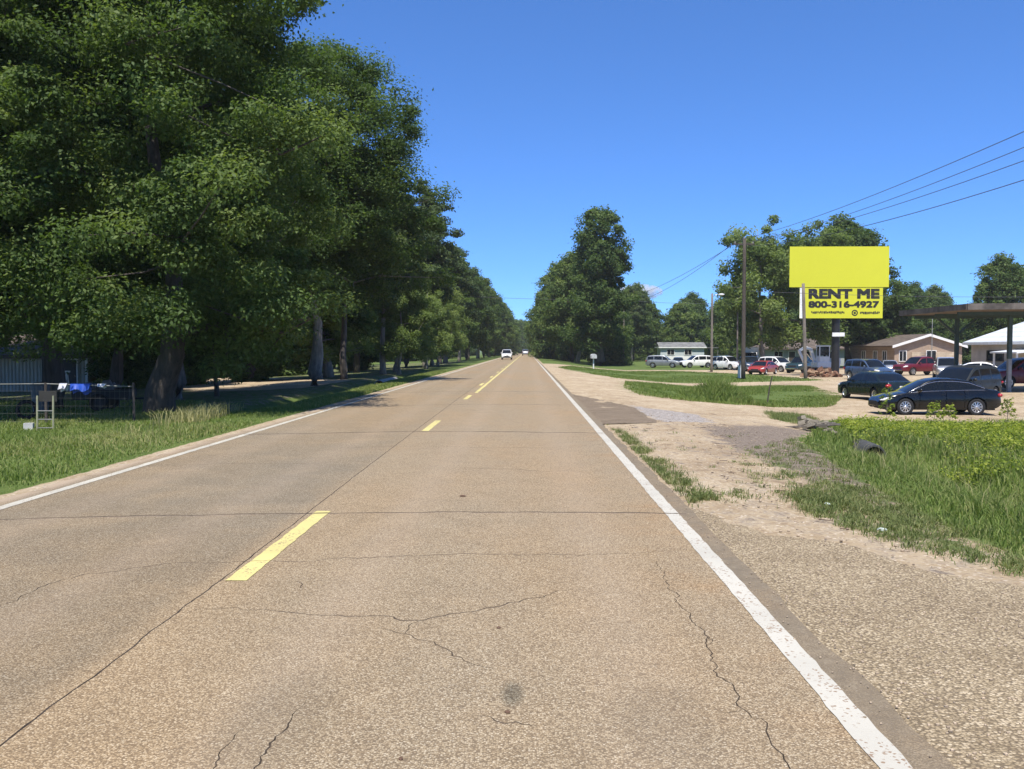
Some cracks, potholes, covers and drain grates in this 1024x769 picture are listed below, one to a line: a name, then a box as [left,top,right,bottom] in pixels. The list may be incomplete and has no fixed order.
crack [654,556,790,769]
crack [213,701,306,769]
crack [220,588,574,669]
